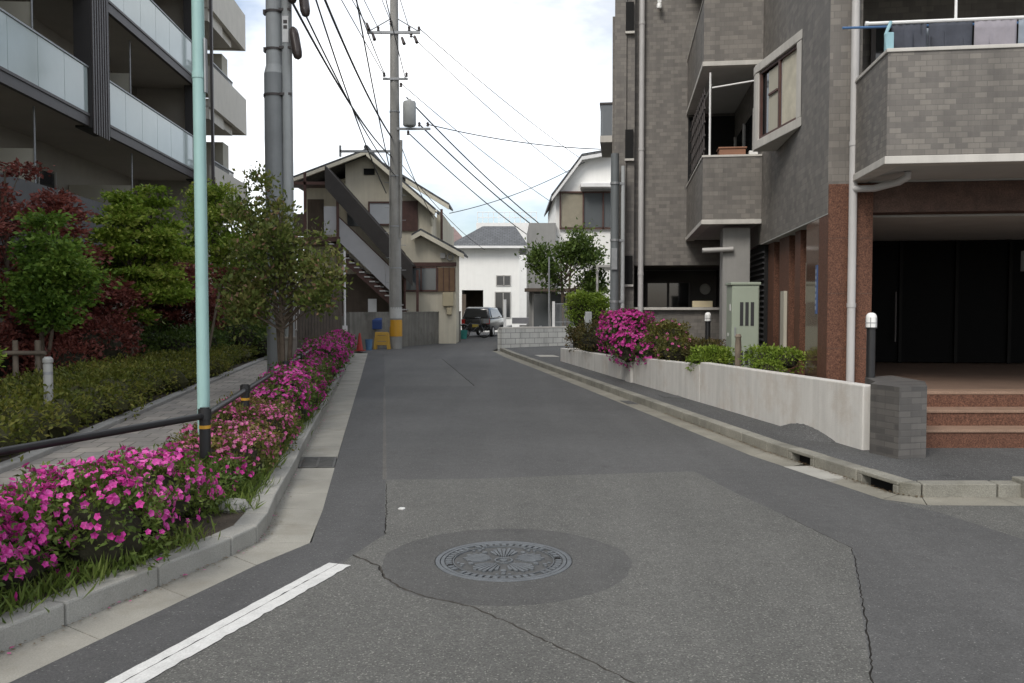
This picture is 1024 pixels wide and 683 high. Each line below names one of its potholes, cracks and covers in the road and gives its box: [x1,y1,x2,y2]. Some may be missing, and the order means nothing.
crack [353,555,635,683]
drain grate [788,448,827,467]
manhole cover [435,541,572,582]
drain grate [298,457,337,468]
drain grate [857,469,913,495]
